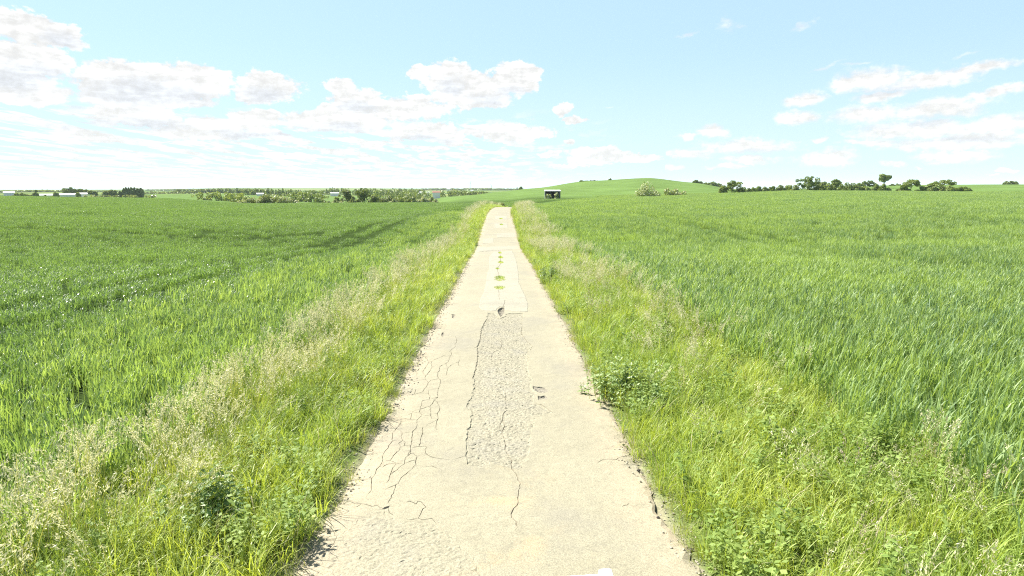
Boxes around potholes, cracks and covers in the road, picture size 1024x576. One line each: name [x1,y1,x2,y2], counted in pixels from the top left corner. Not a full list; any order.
crack [500,395,521,526]
crack [343,339,461,521]
